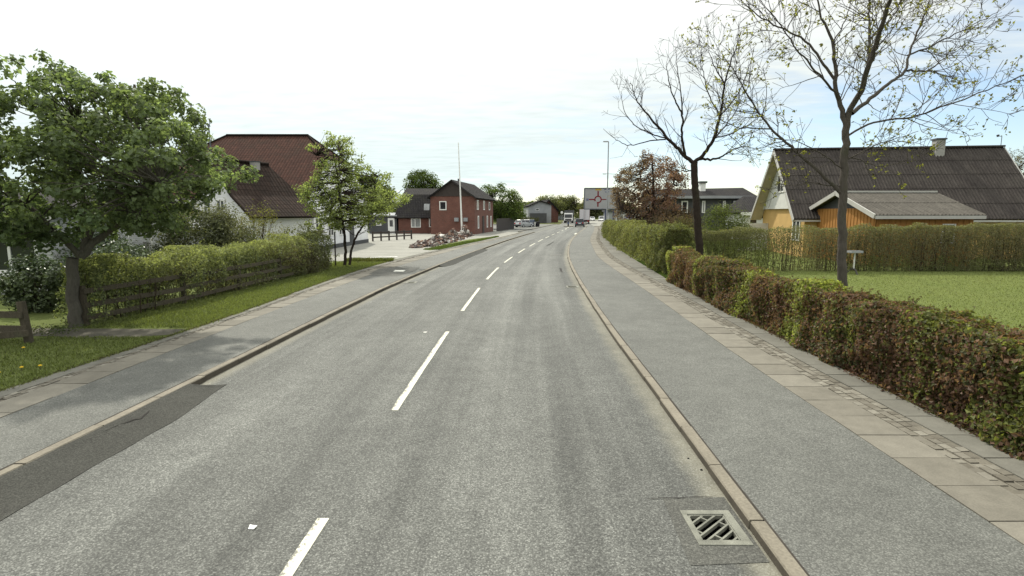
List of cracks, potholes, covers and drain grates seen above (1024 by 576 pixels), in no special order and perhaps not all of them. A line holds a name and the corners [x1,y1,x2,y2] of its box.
drain grate [680,510,754,546]
